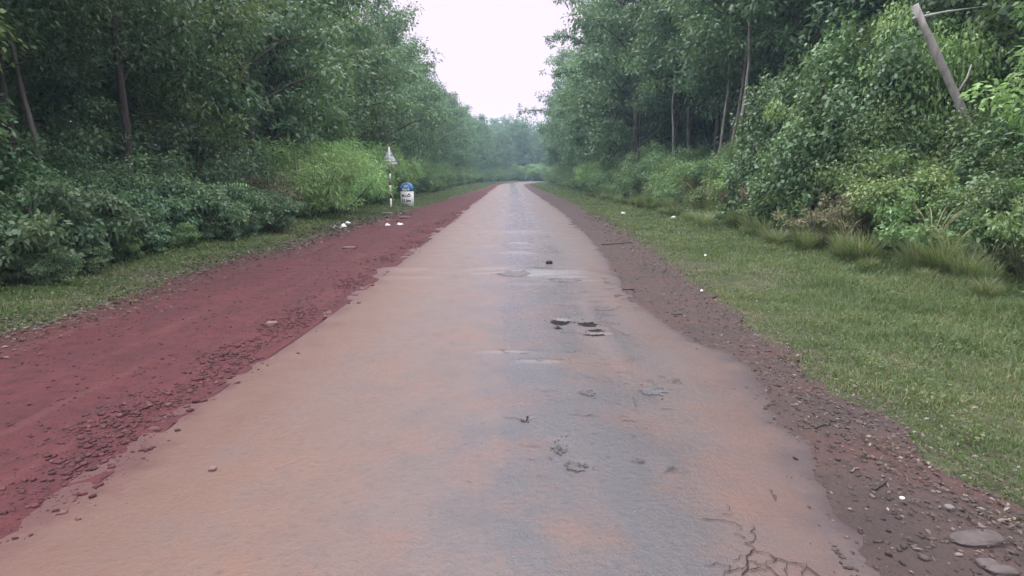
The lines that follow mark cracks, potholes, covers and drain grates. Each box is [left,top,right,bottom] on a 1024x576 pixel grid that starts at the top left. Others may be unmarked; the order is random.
pothole [639,384,668,396]
pothole [550,440,567,455]
pothole [564,460,588,472]
crack [701,503,820,576]
